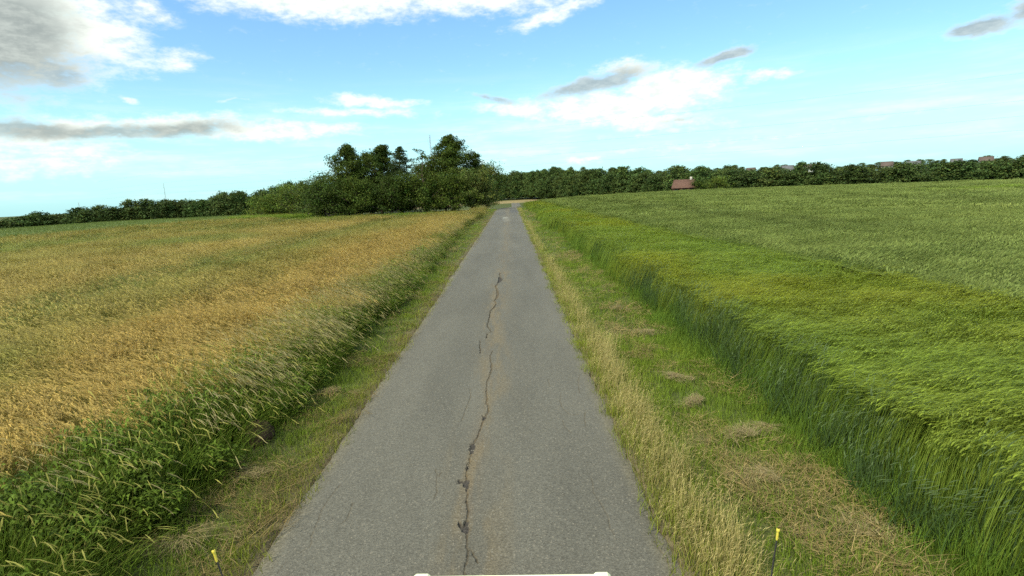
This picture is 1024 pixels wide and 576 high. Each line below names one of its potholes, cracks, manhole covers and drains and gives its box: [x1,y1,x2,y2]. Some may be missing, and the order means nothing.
crack [547,375,587,434]
crack [433,469,443,500]
crack [460,272,501,576]
